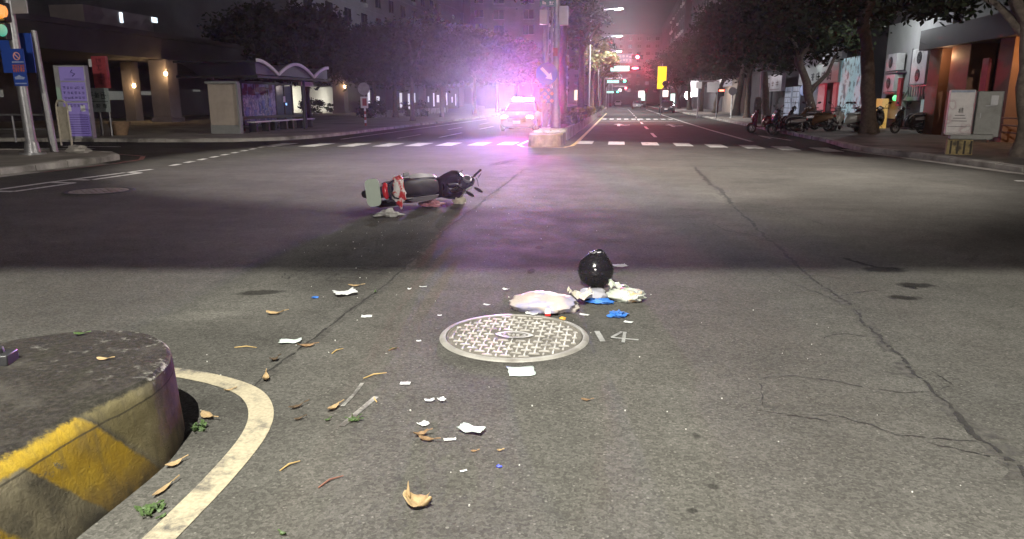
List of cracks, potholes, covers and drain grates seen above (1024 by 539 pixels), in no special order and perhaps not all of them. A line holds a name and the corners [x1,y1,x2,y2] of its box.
manhole cover [439,314,589,362]
manhole cover [61,187,136,195]
crack [693,167,1024,481]
